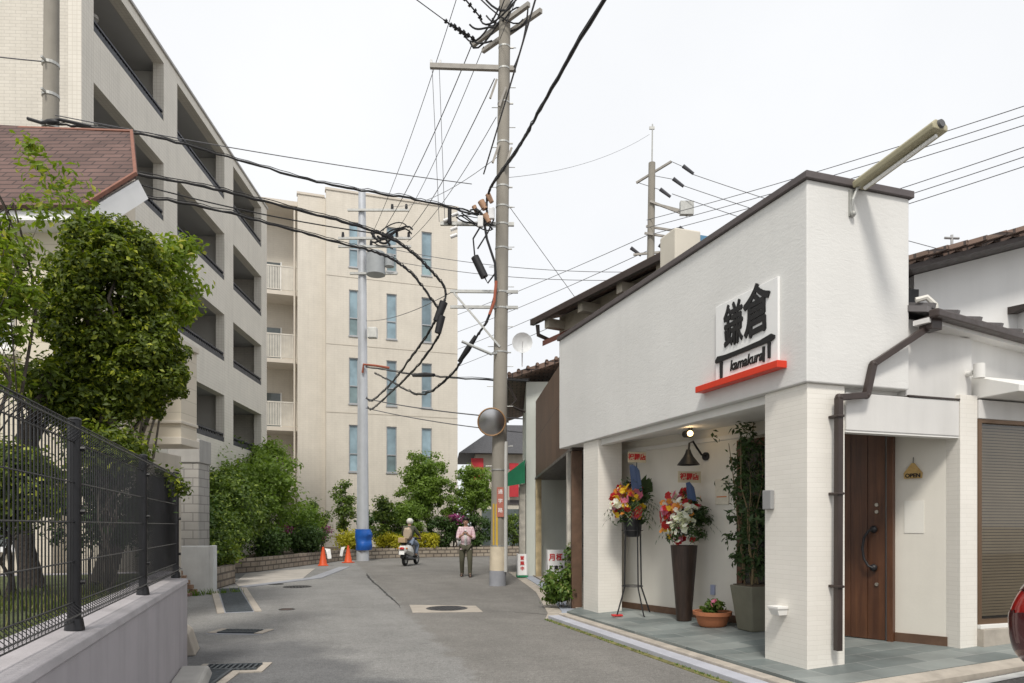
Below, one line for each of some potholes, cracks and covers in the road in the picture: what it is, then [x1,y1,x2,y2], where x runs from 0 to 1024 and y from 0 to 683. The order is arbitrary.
manhole cover [409,605,482,613]
drain grate [200,662,272,683]
